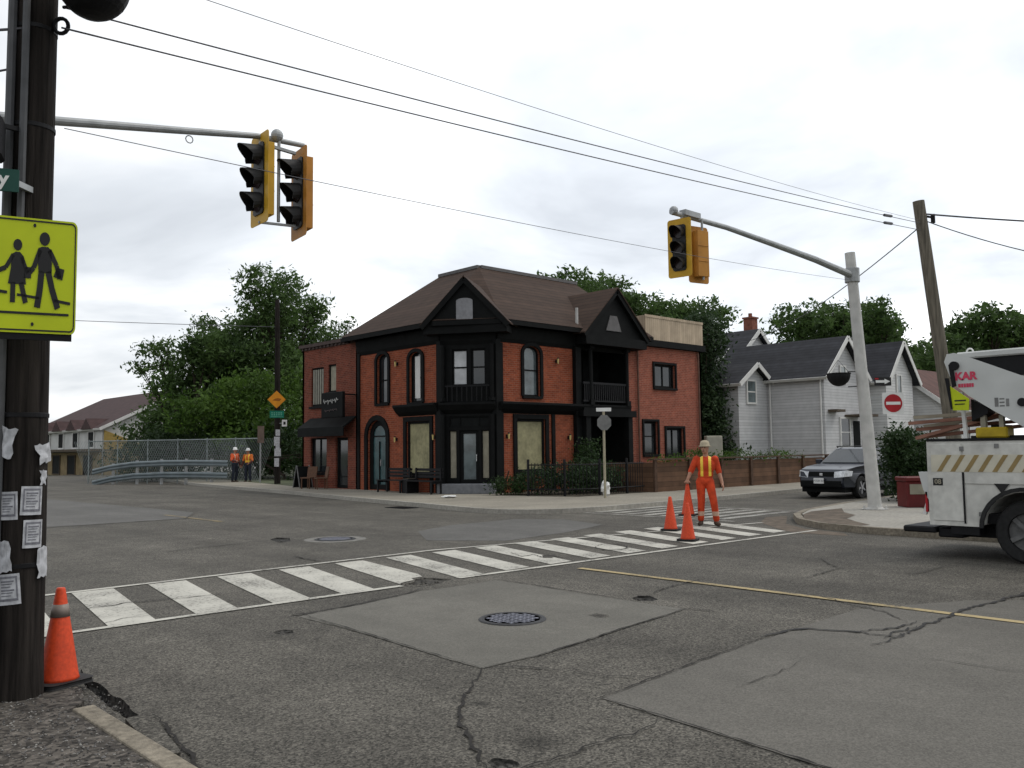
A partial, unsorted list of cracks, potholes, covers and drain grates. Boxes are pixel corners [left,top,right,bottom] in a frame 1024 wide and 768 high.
crack [457,666,561,768]
manhole cover [478,612,546,626]
pothole [404,578,450,587]
pothole [80,669,139,718]
